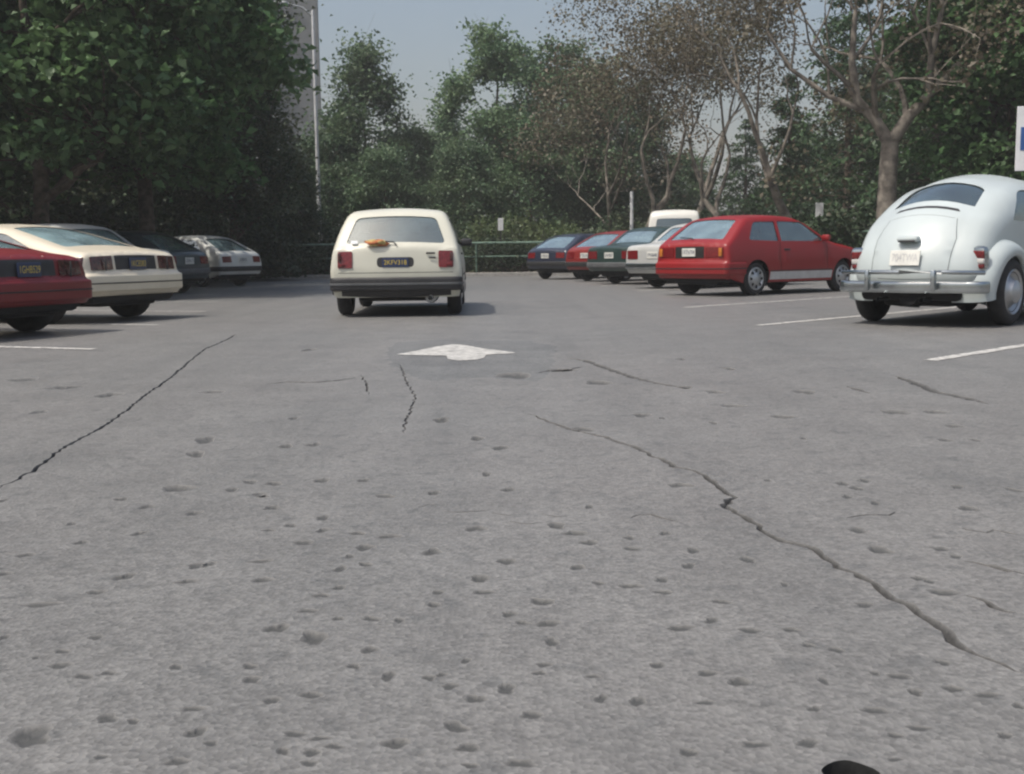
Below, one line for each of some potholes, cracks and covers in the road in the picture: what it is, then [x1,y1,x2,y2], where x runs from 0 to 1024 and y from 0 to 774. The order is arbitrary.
crack [270,375,370,395]
crack [0,334,236,488]
pothole [443,720,471,733]
pothole [299,629,329,646]
crack [538,358,690,389]
pothole [7,723,54,748]
crack [444,376,1024,673]
crack [400,365,417,433]
